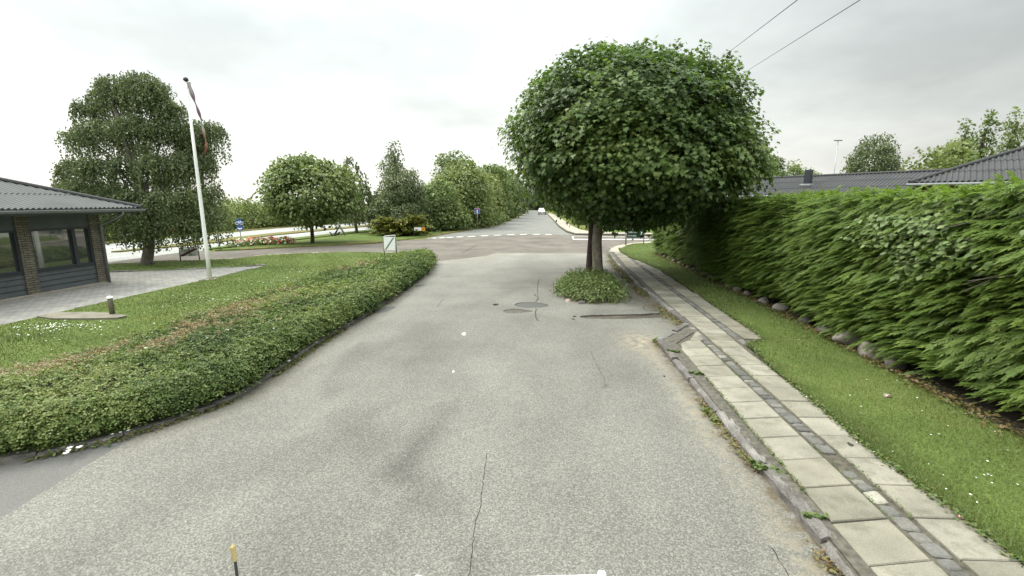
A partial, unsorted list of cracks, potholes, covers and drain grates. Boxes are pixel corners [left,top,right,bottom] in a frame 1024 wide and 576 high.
crack [468,452,487,576]
